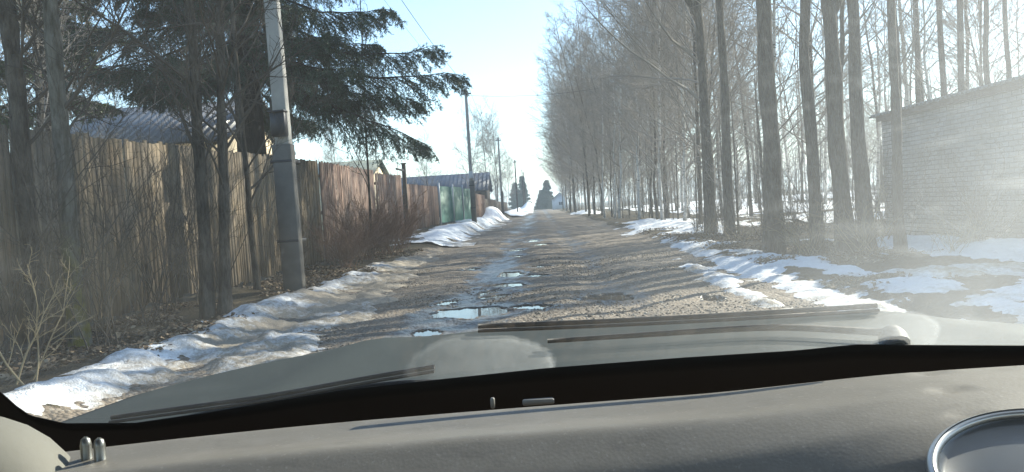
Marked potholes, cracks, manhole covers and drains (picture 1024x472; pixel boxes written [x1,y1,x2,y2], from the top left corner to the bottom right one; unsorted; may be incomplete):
pothole [411,328,447,337]
pothole [422,305,511,320]
